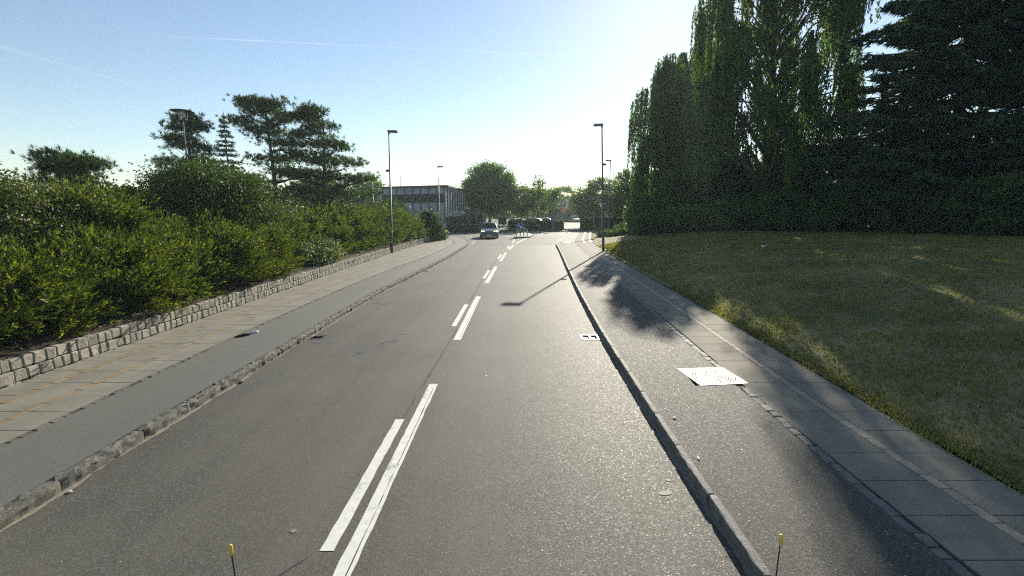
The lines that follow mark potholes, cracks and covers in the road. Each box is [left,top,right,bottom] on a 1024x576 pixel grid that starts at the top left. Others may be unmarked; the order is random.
manhole cover [678,367,750,386]
